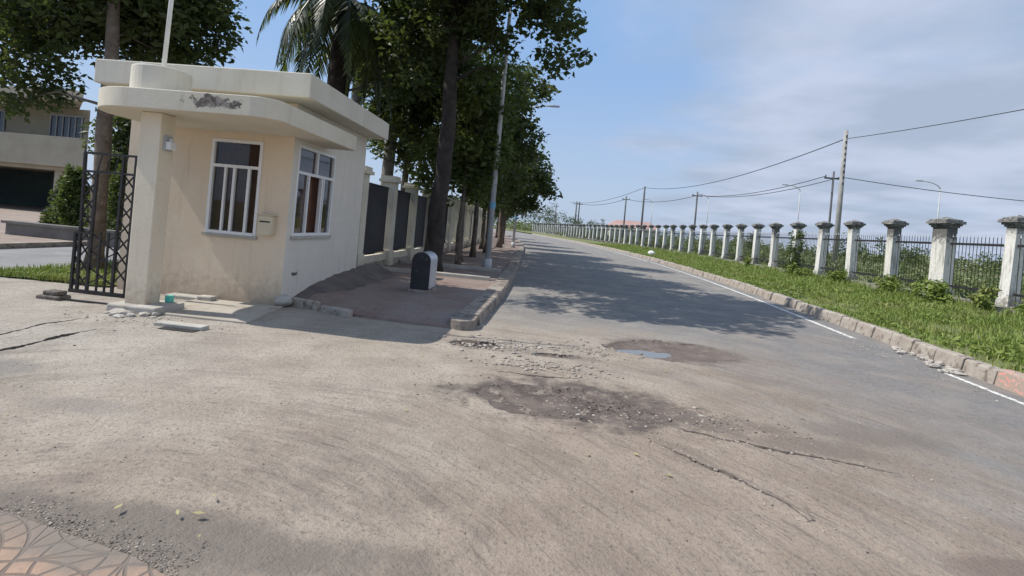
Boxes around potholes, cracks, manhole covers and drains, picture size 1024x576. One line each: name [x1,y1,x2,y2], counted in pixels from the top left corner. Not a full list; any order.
pothole [516,350,599,363]
pothole [587,337,753,367]
crack [651,422,901,522]
pothole [449,379,708,434]
pothole [432,337,515,354]
crack [0,317,103,358]
